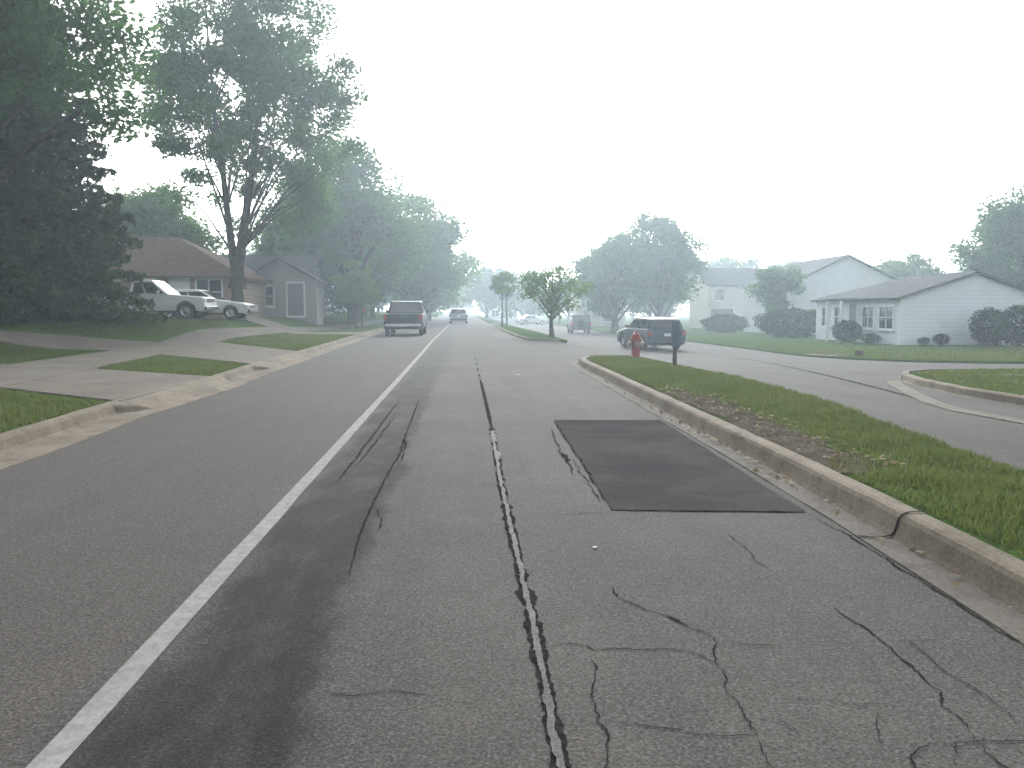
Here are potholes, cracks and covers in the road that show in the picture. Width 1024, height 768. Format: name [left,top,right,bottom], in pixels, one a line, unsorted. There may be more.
crack [550,586,798,768]
crack [323,689,454,701]
crack [797,698,889,742]
crack [835,607,1024,768]
crack [551,429,605,515]
crack [339,404,417,575]
